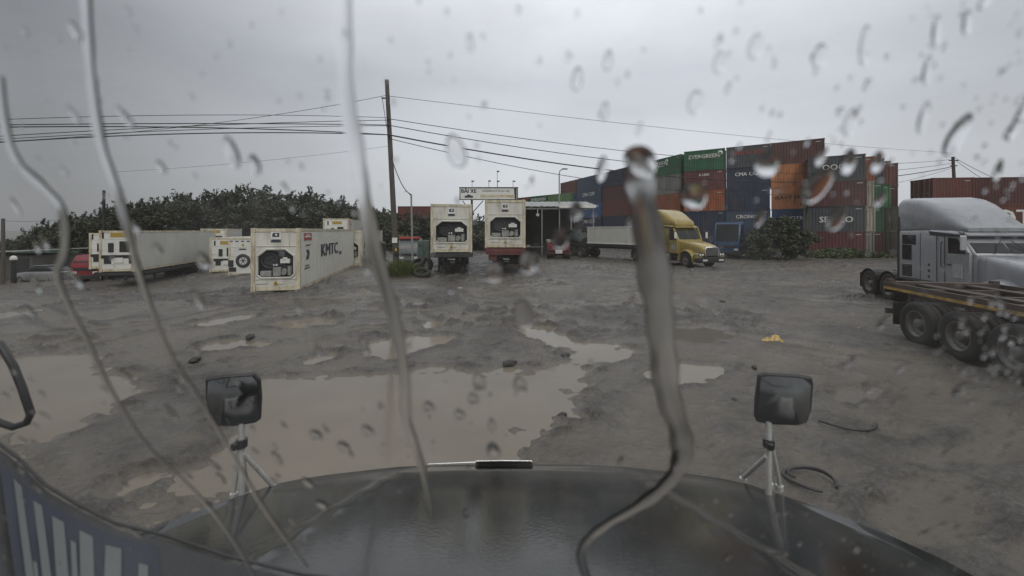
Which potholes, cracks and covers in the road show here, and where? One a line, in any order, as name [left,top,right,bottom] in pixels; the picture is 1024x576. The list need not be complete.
pothole [61,317,651,534]
pothole [0,342,198,482]
pothole [630,358,744,391]
pothole [624,322,754,347]
pothole [177,312,272,328]
